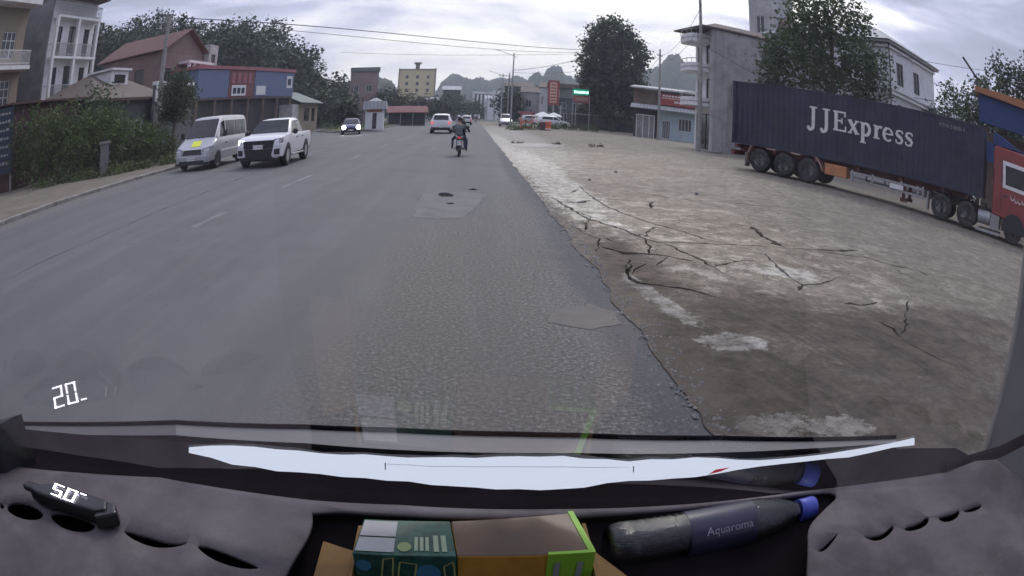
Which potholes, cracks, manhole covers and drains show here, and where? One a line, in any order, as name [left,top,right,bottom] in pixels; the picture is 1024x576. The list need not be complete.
crack [552,186,958,367]
